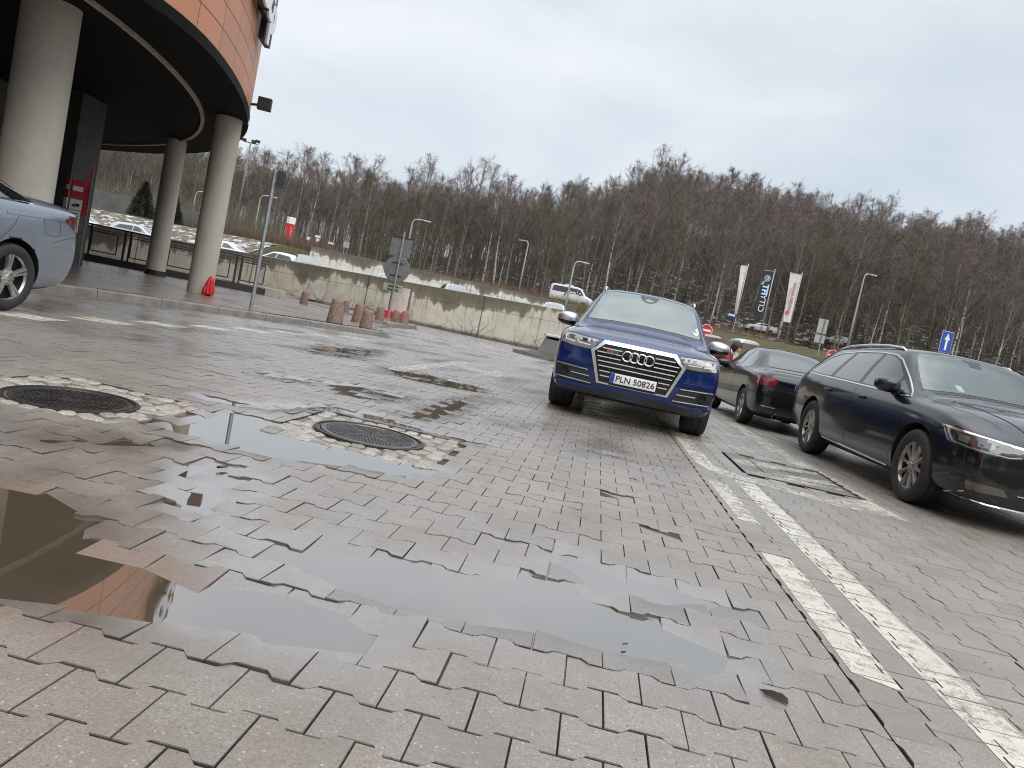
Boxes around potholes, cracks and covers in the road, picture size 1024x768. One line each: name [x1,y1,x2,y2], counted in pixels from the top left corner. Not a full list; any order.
manhole cover [724,452,857,498]
manhole cover [0,385,140,415]
manhole cover [314,420,424,451]
